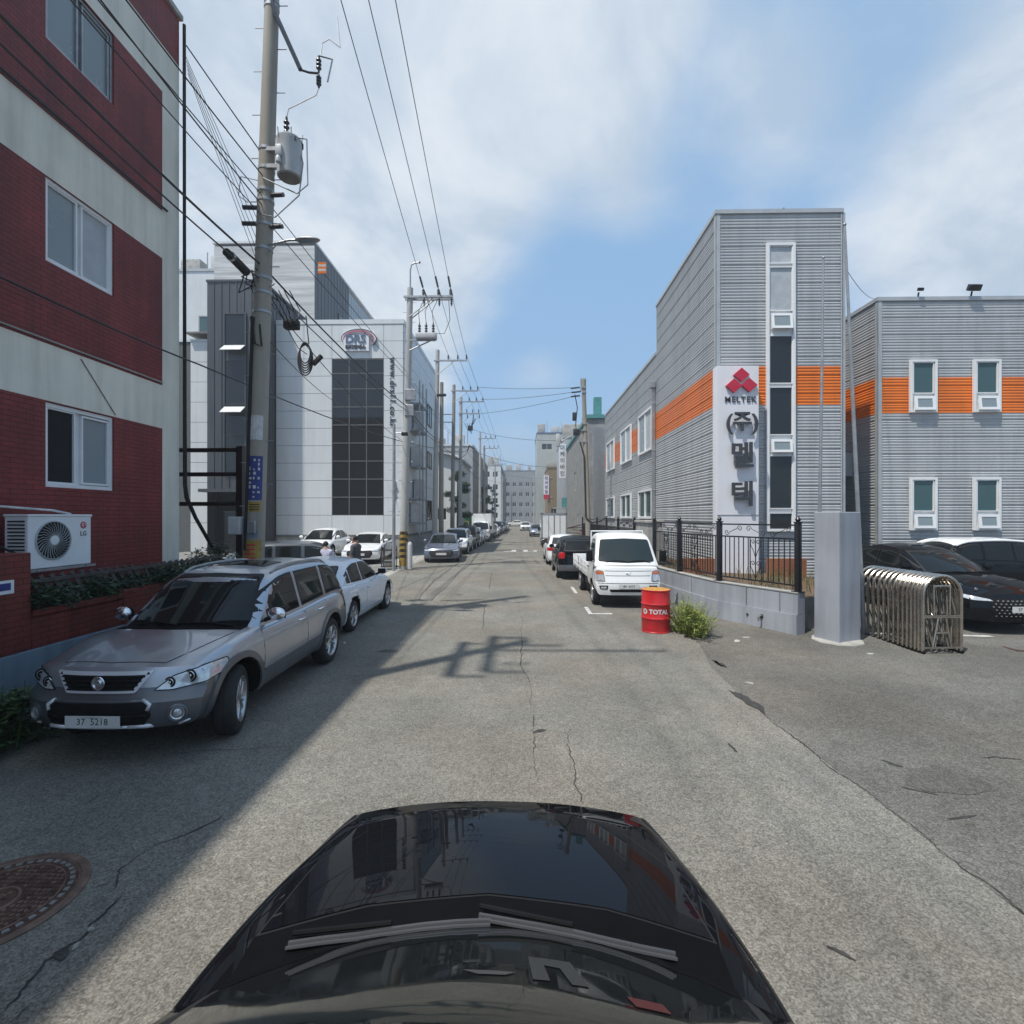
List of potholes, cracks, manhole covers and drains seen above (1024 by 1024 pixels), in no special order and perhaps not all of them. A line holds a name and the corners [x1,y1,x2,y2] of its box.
crack [1,815,224,1019]
manhole cover [0,852,92,946]
crack [520,615,539,782]
crack [567,730,584,804]
